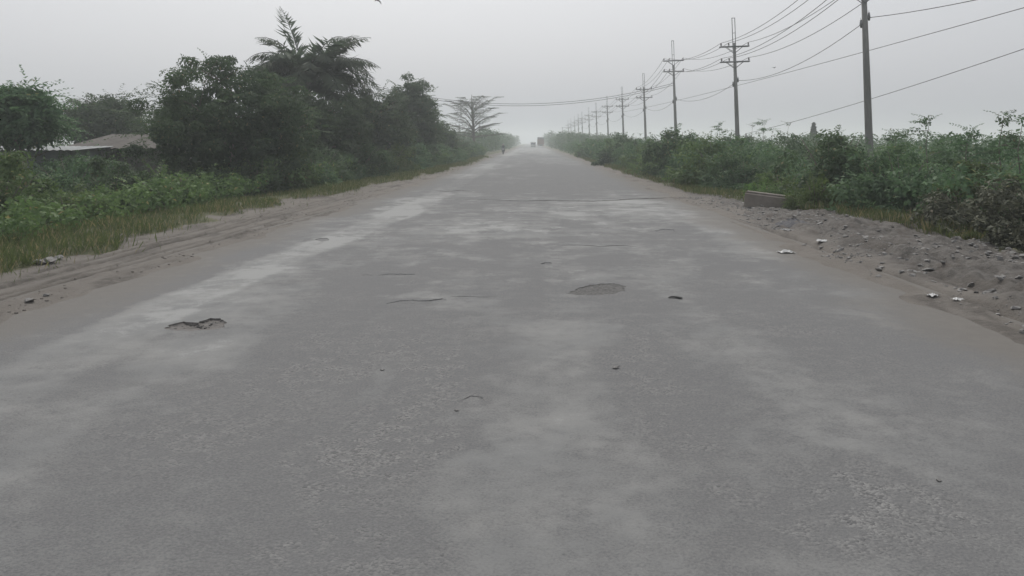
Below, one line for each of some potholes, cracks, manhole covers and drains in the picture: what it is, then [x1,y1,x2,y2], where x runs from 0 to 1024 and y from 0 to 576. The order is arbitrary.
pothole [165,318,227,331]
pothole [567,283,626,295]
